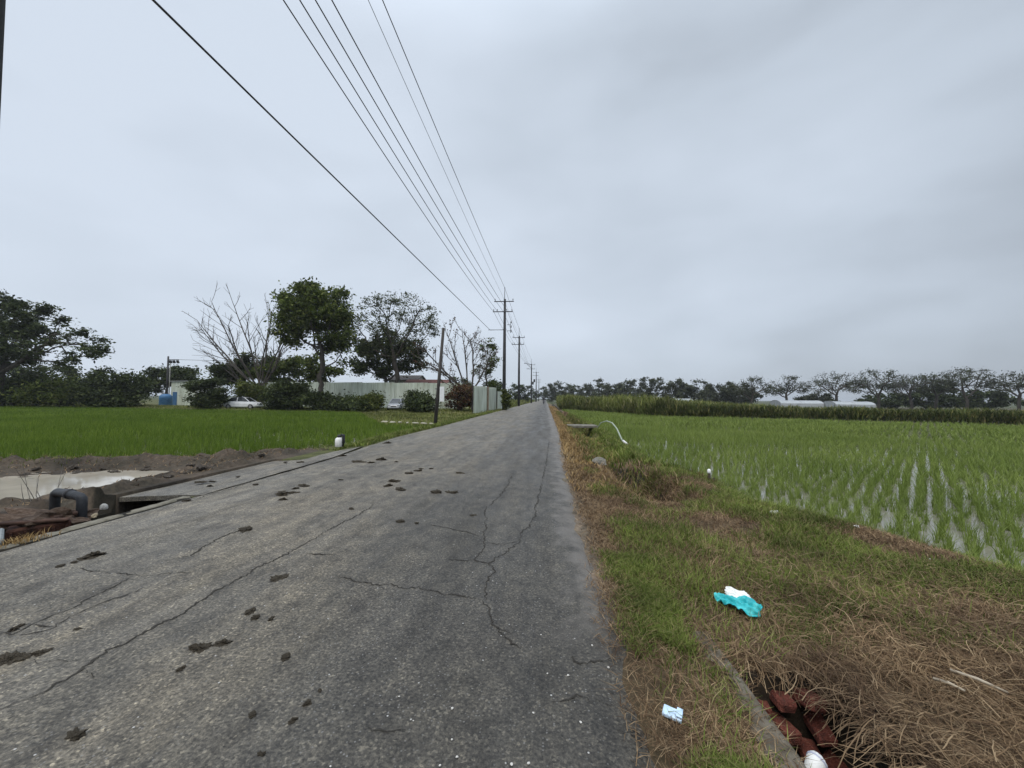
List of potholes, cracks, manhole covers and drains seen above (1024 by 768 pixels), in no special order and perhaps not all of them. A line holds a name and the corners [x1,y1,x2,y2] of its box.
crack [0,503,375,709]
crack [570,656,612,664]
crack [338,446,549,649]
